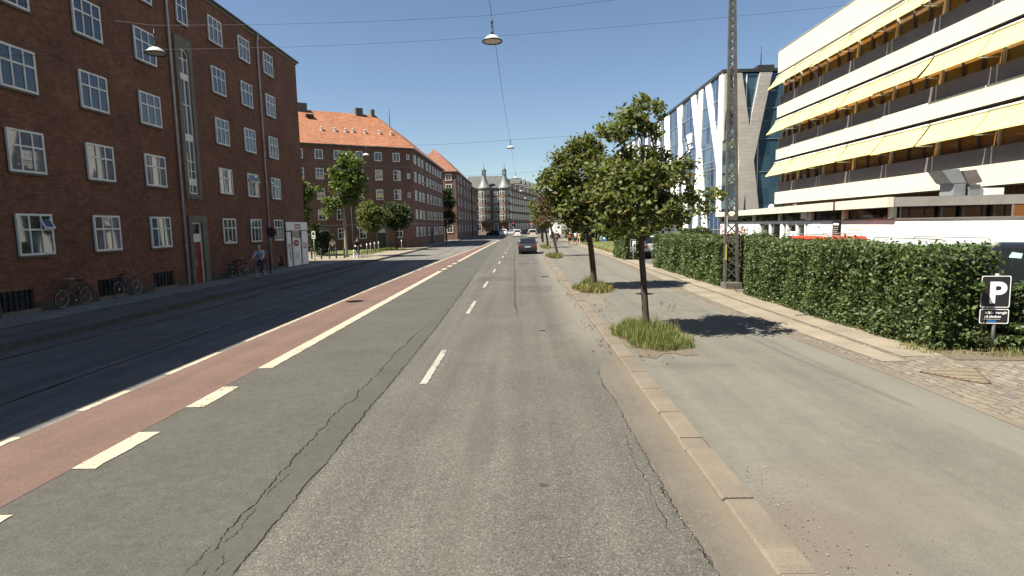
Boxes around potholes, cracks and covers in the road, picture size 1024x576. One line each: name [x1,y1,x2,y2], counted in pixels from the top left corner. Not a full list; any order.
crack [598,370,720,576]
drain grate [919,367,991,384]
crack [183,328,422,576]
